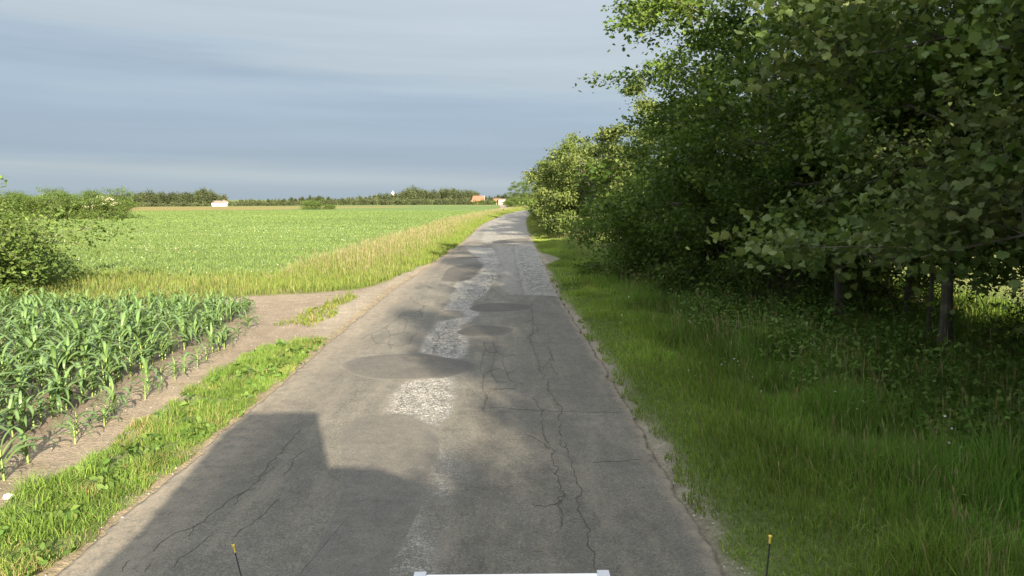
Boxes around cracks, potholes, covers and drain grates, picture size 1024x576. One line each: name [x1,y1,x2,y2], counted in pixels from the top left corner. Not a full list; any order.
crack [361,300,460,354]
crack [480,246,597,571]
crack [121,429,303,572]
